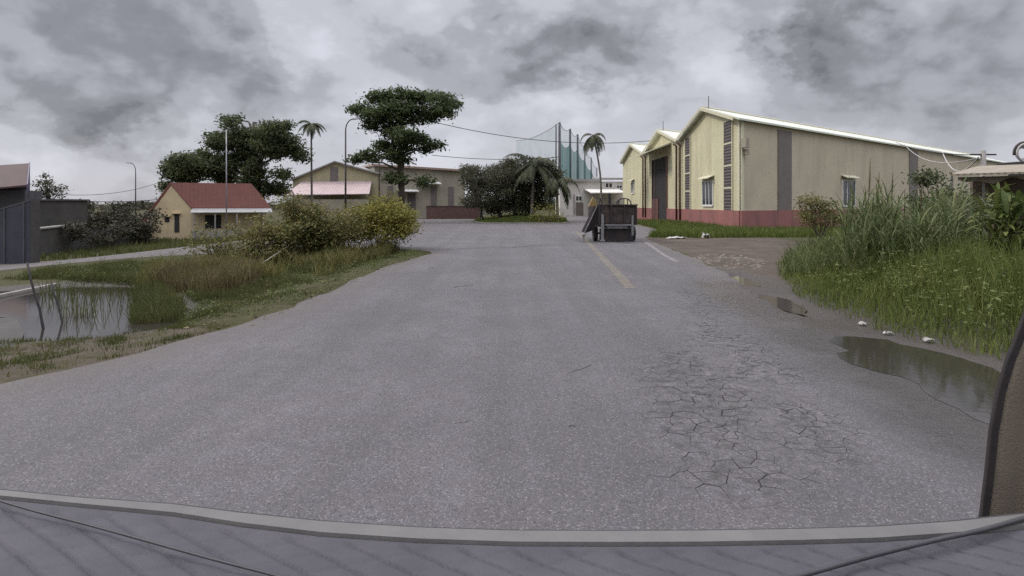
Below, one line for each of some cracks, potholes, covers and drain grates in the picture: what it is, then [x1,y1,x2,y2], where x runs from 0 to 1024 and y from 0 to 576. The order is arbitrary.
crack [614,273,895,524]
